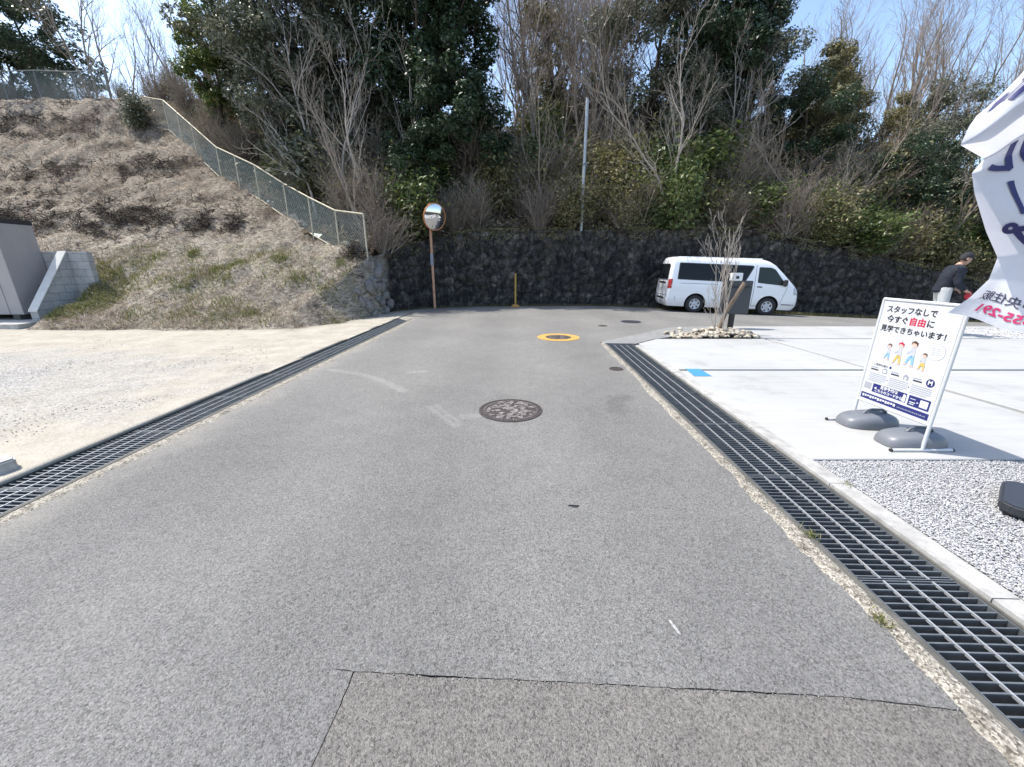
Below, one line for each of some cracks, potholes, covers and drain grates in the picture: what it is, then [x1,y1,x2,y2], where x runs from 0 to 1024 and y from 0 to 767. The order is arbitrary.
drain grate [133,397,246,432]
drain grate [620,356,667,371]
drain grate [355,330,387,338]
drain grate [305,347,351,359]
drain grate [331,337,370,347]
drain grate [267,358,326,375]
drain grate [748,476,954,582]
drain grate [636,371,696,392]
manhole cover [479,399,542,422]
drain grate [859,580,1024,735]
drain grate [693,424,812,477]
drain grate [0,489,50,514]
